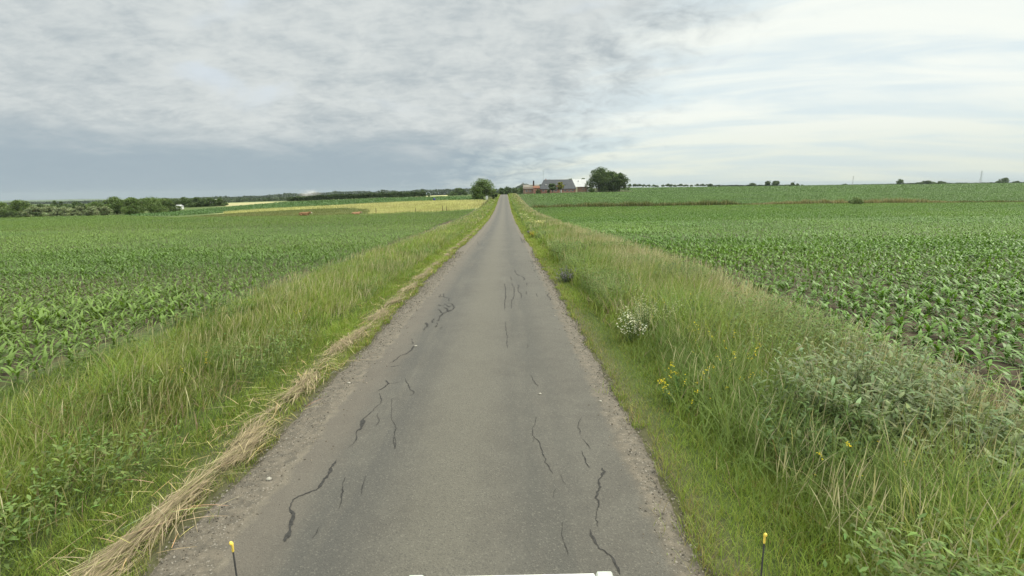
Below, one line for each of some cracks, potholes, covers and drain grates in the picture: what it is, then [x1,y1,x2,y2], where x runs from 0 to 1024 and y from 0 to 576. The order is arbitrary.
crack [283,294,455,541]
crack [504,261,533,346]
crack [578,417,620,574]
crack [532,420,566,497]
